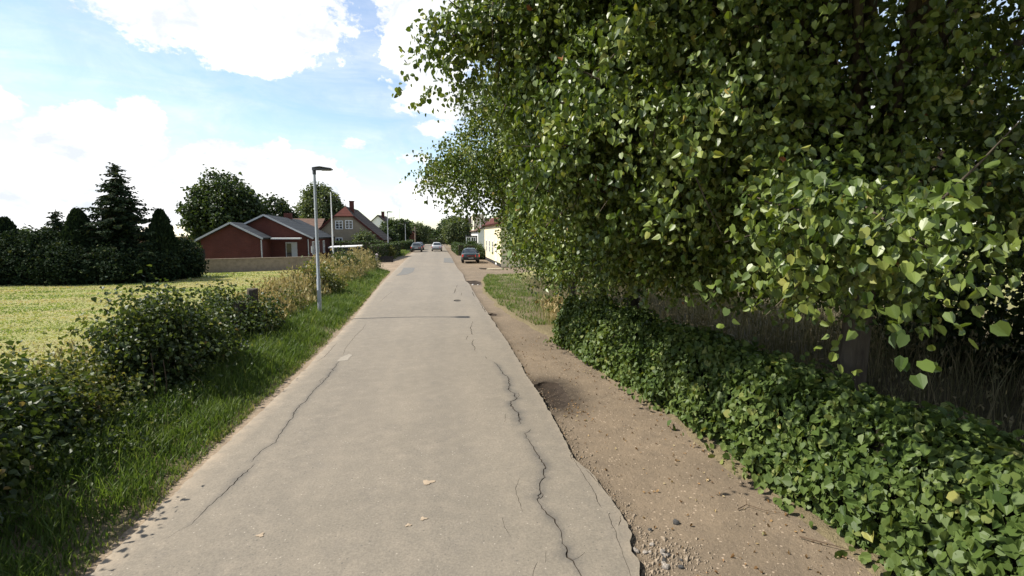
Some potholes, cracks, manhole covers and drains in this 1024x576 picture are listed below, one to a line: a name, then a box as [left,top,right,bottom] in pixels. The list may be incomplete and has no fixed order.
crack [570,450,631,575]
crack [455,290,585,576]
crack [168,335,356,538]
